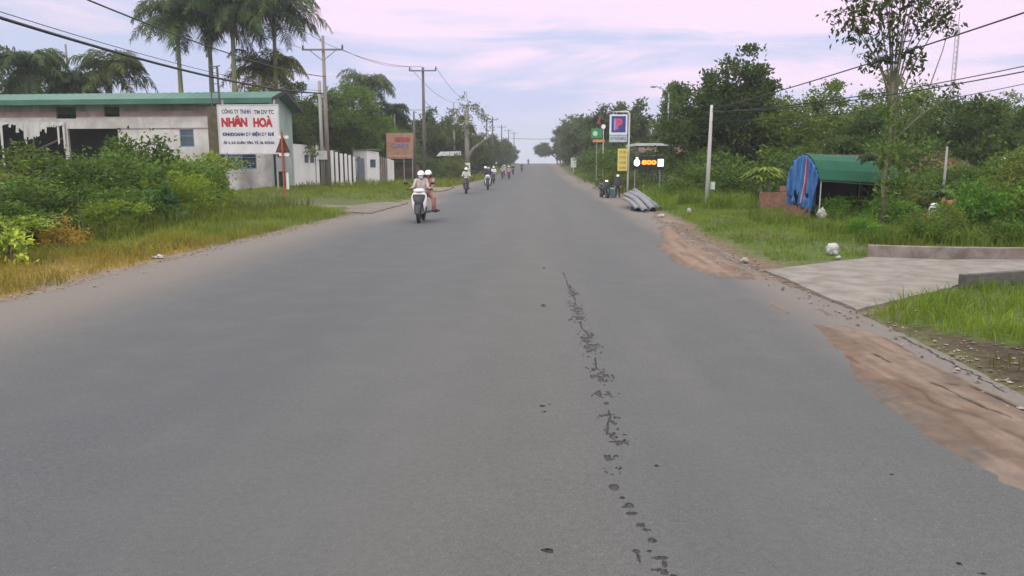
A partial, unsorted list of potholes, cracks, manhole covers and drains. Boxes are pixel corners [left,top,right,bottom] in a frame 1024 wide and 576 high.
crack [562,272,675,576]
crack [899,336,1007,393]
